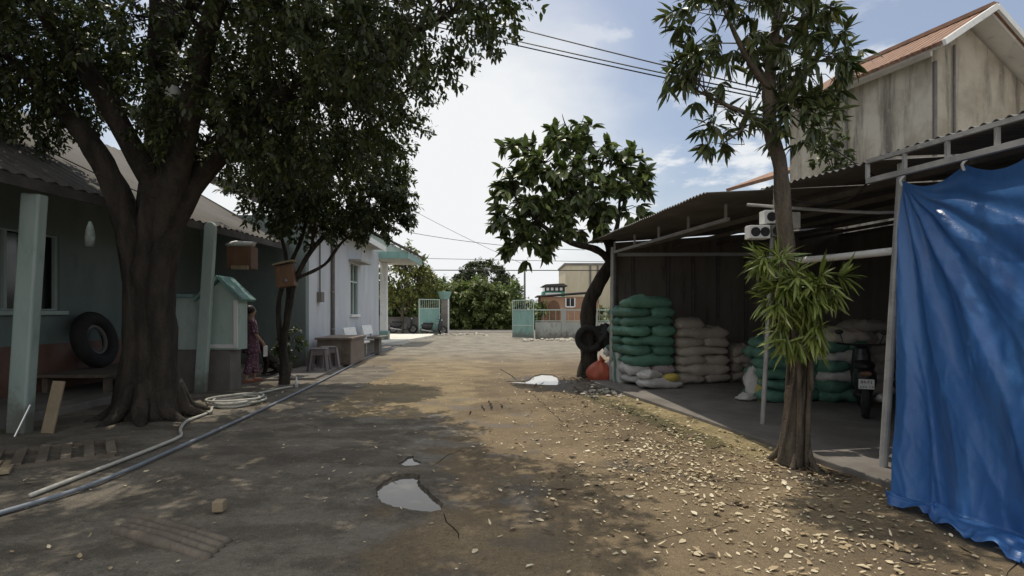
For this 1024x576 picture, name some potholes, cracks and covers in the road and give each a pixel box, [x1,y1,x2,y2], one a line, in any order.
pothole [375,473,443,512]
pothole [398,456,421,466]
pothole [505,374,559,385]
